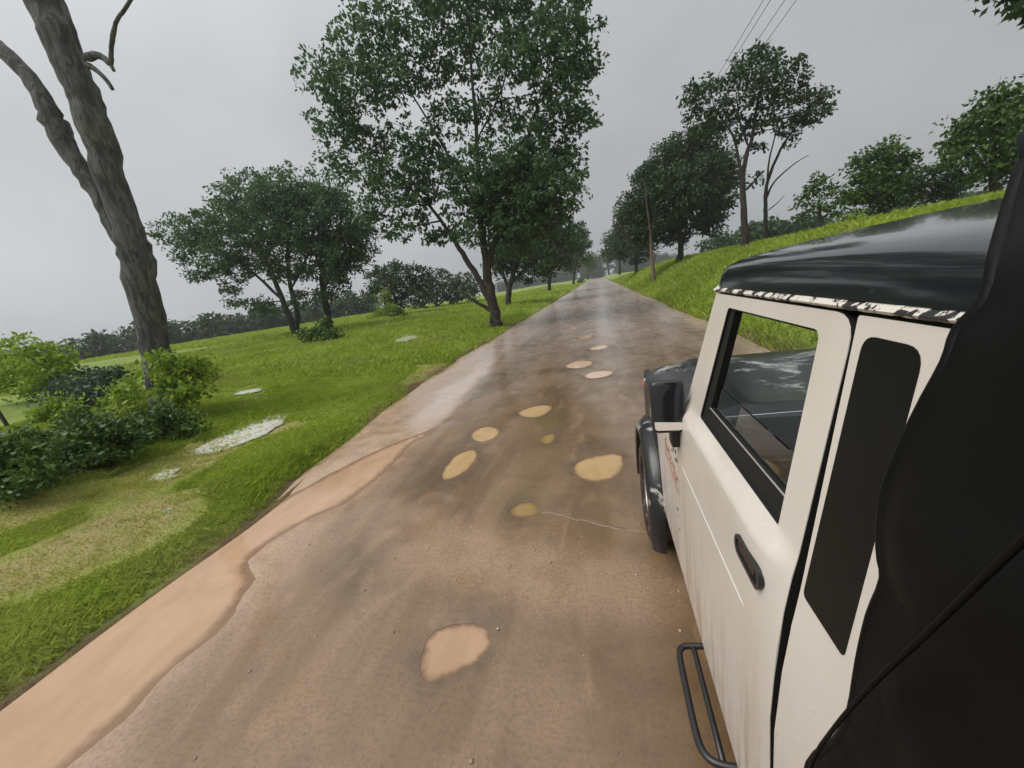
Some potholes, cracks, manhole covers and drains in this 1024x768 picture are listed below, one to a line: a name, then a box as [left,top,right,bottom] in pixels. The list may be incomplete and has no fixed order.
crack [537,509,647,533]
